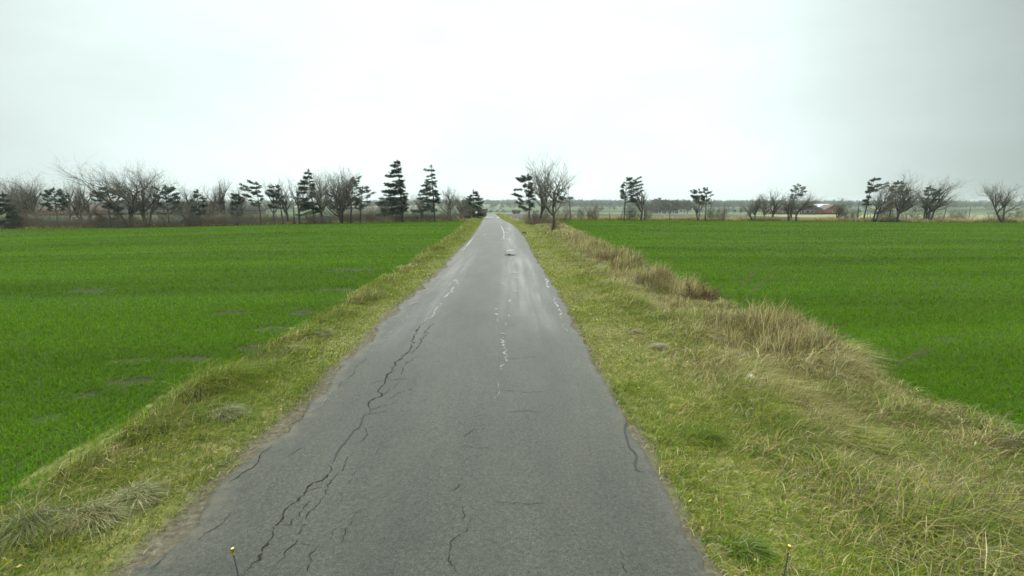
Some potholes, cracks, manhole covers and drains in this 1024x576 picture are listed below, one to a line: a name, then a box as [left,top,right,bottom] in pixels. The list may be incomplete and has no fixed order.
crack [229,280,458,575]
